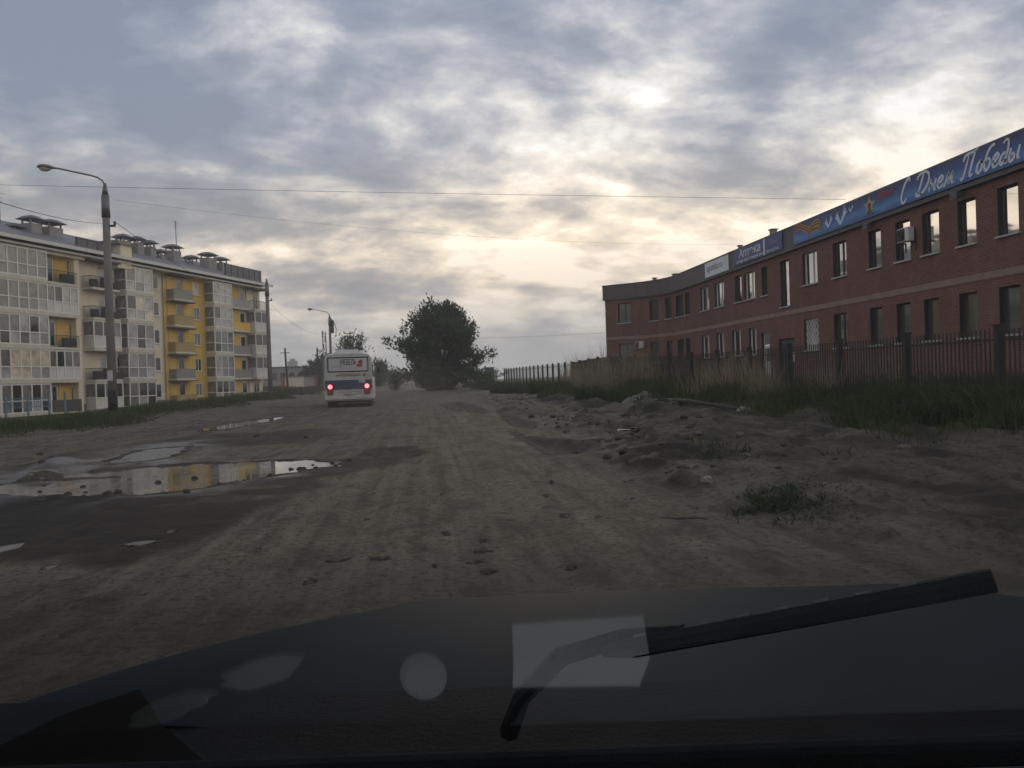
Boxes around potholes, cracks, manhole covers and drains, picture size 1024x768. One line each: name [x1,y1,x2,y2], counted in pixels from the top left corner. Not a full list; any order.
pothole [439,402,488,414]
pothole [0,543,24,552]
pothole [362,445,432,460]
pothole [0,459,348,502]
pothole [200,417,284,431]
pothole [103,445,194,465]
